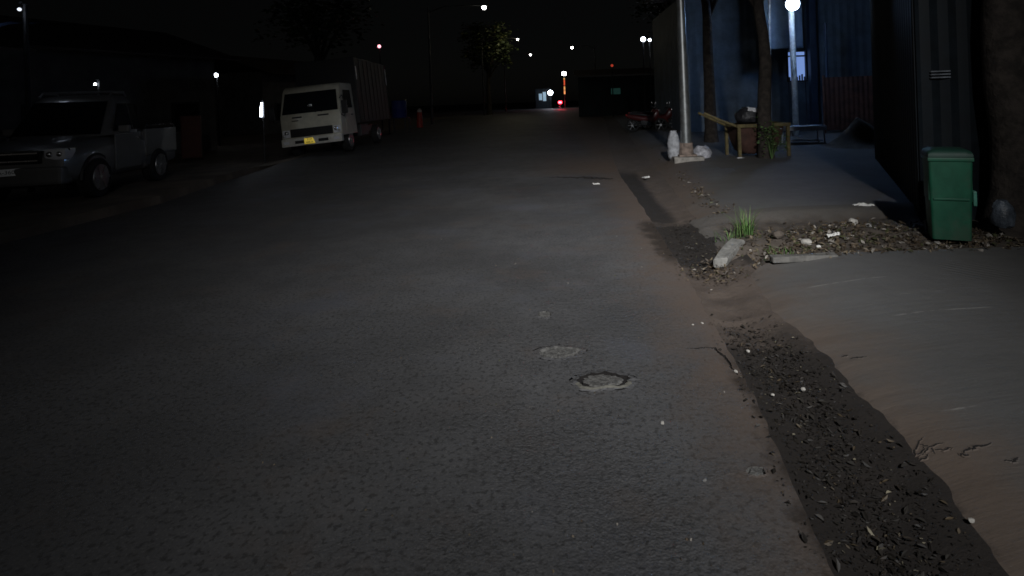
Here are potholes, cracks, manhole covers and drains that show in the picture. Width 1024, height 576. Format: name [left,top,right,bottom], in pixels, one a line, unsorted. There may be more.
crack [912,437,1020,464]
crack [690,347,738,375]
pothole [532,345,587,361]
pothole [535,310,554,319]
pothole [568,369,639,392]
pothole [742,465,769,479]
